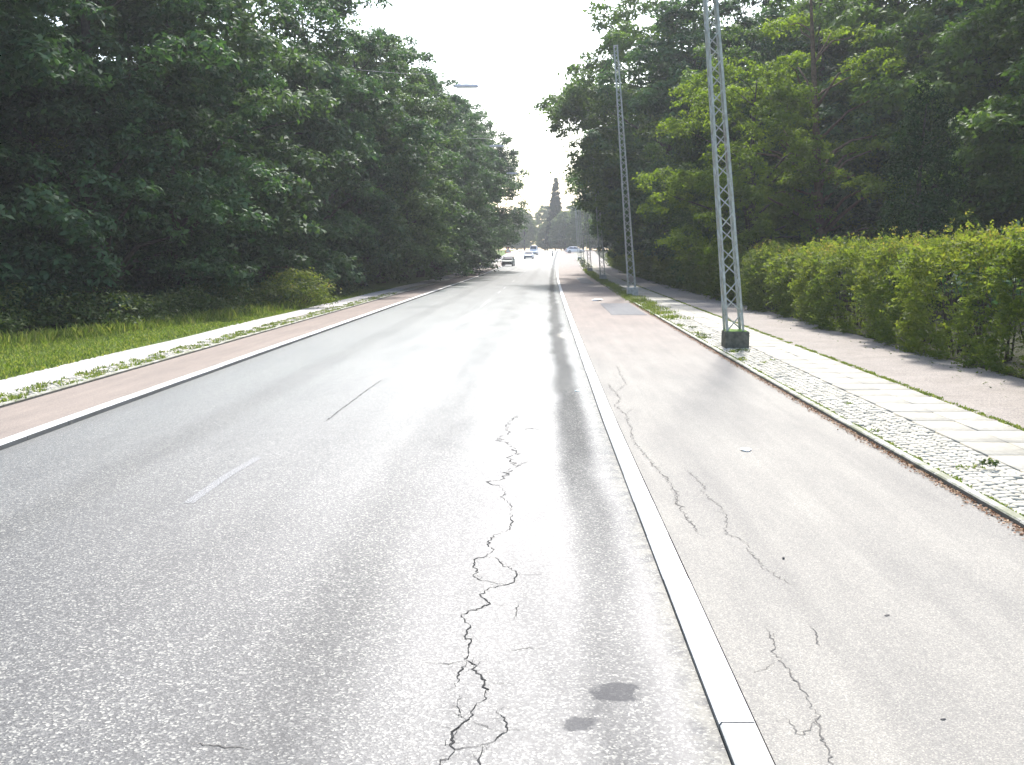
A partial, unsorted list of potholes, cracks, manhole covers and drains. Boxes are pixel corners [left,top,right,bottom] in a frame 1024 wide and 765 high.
crack [751,628,834,765]
crack [186,742,259,750]
crack [426,489,532,765]
crack [486,415,533,485]
crack [607,367,794,585]
